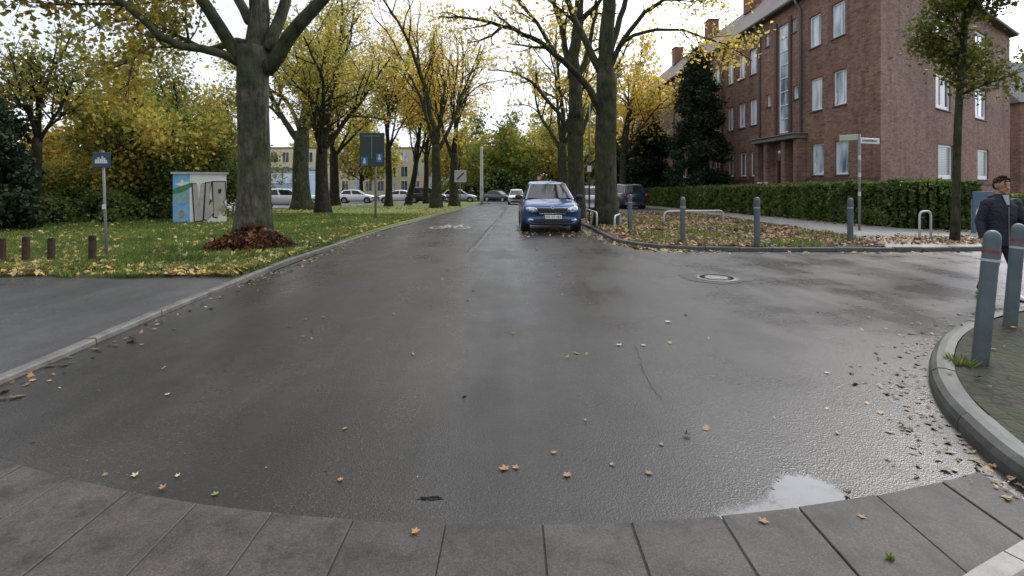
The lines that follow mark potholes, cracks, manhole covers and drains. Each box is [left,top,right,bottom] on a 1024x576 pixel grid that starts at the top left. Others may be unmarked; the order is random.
manhole cover [679,273,756,284]
